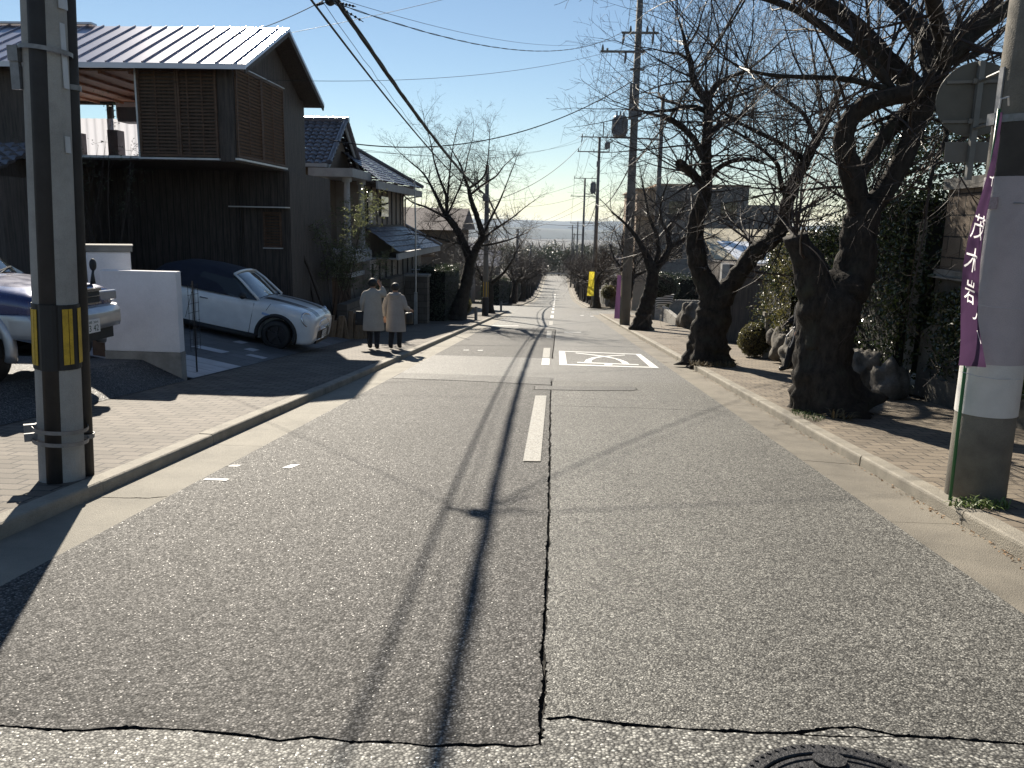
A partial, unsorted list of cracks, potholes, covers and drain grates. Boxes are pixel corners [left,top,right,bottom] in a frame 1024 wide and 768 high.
manhole cover [745,744,912,768]
crack [0,380,1024,748]
